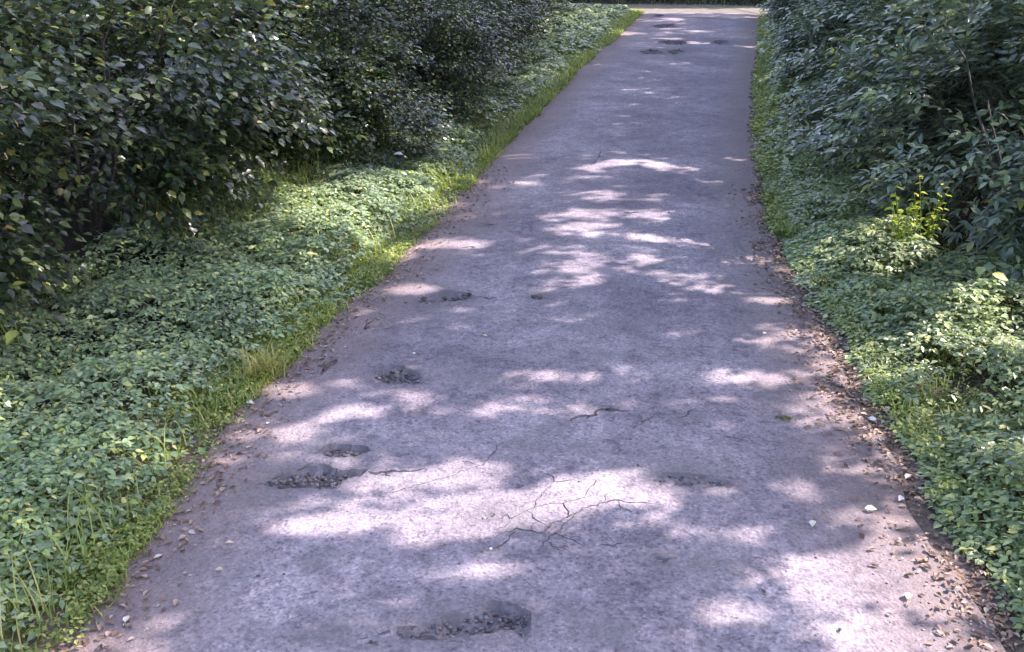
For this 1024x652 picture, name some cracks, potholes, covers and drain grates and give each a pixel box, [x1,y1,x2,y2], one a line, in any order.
crack [570,407,656,430]
pothole [318,443,371,458]
pothole [259,464,368,491]
crack [487,473,660,551]
pothole [357,600,532,645]
pothole [372,365,424,385]
